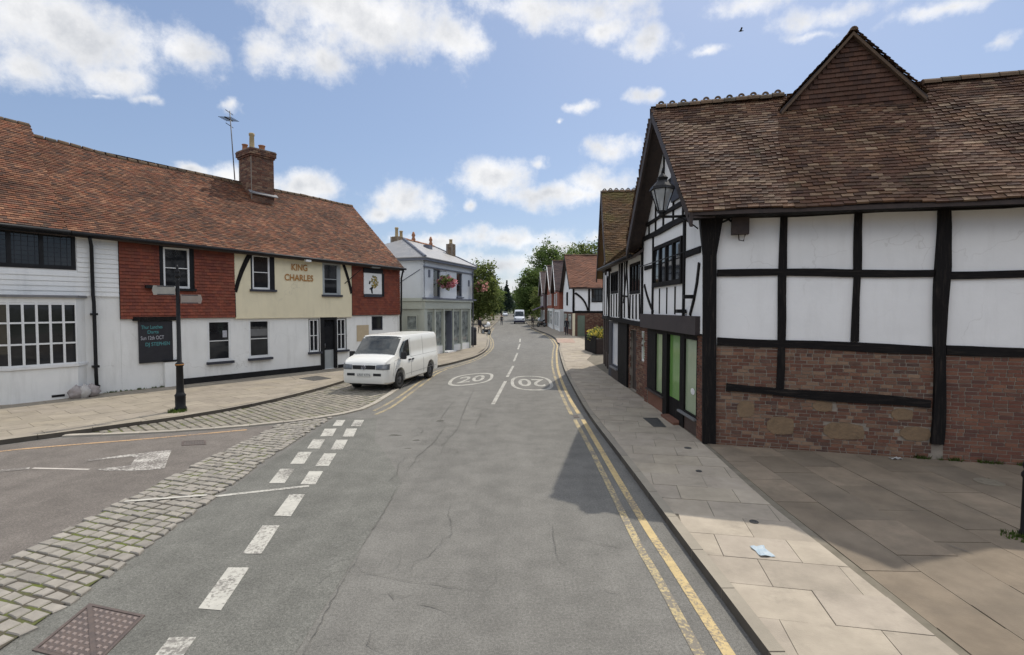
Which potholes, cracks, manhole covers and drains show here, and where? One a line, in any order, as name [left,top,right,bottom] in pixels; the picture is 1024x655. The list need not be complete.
utility cover [644,418,666,427]
crack [376,388,486,485]
crack [302,506,497,655]
manhole cover [32,603,145,655]
